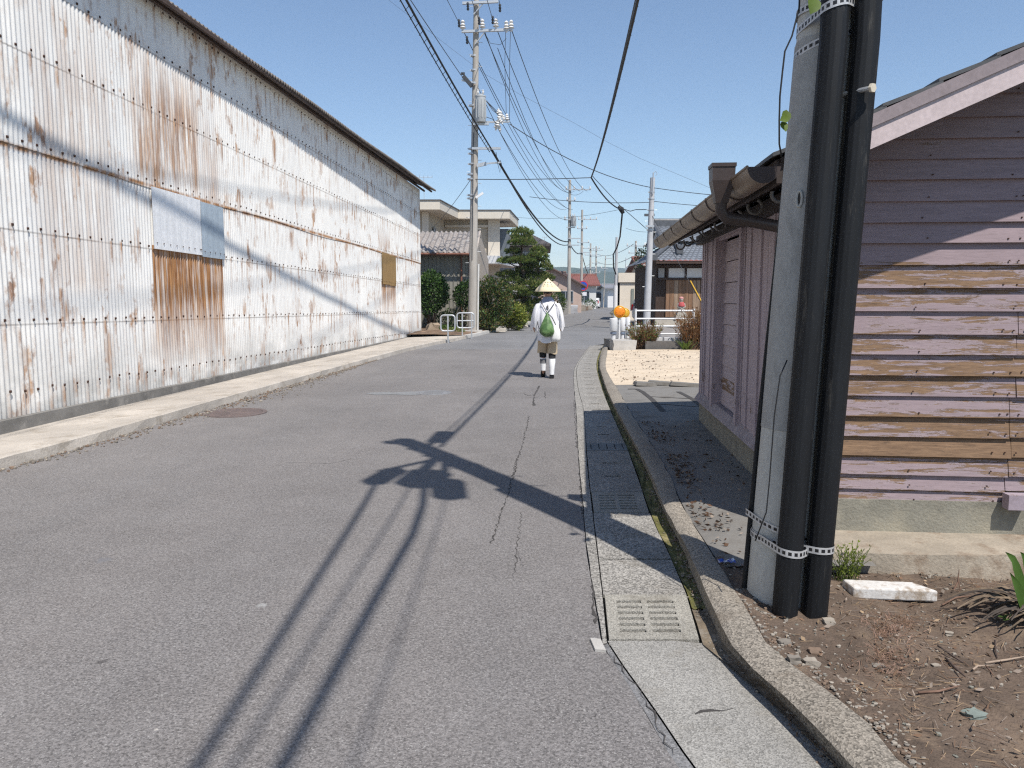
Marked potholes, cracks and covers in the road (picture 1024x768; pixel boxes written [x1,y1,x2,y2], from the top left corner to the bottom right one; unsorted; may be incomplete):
crack [609,654,674,755]
crack [490,386,546,572]
manhole cover [202,408,267,418]
drain grate [591,492,649,513]
drain grate [605,595,699,653]
